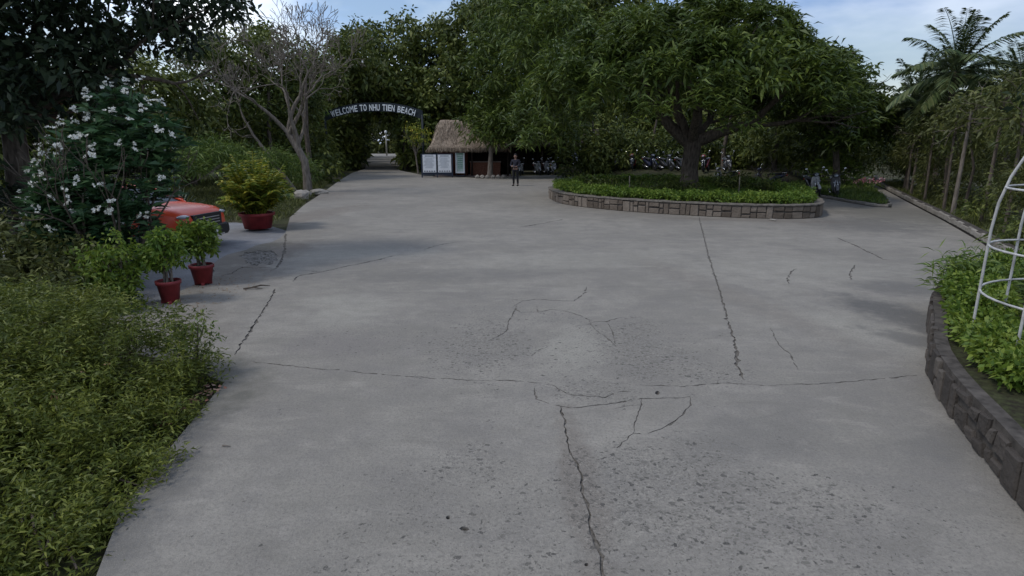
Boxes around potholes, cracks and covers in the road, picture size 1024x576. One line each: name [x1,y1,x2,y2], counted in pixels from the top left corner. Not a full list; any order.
crack [495,288,627,354]
crack [534,385,692,576]
crack [234,289,276,355]
crack [839,238,887,279]
crack [225,234,395,280]
